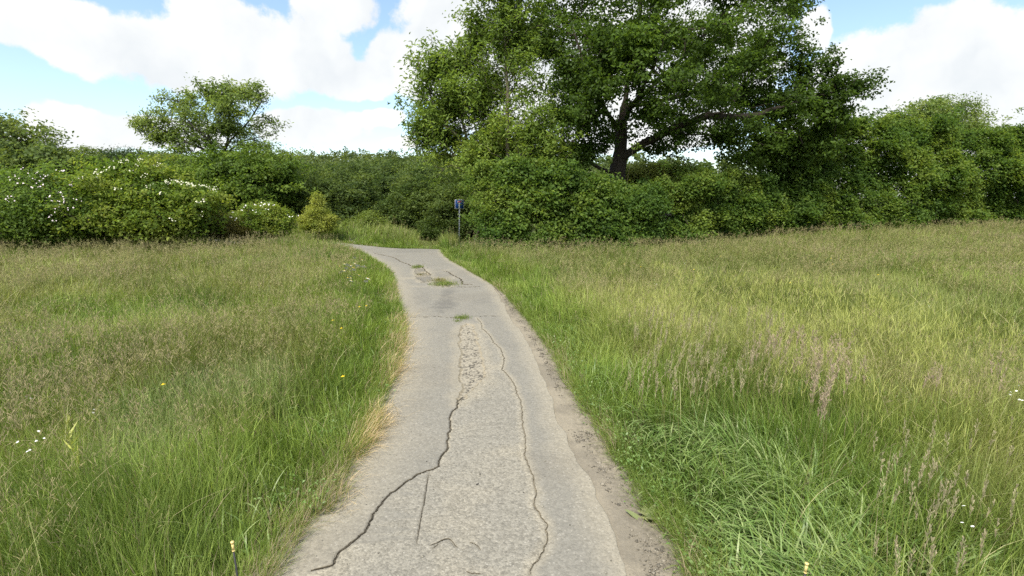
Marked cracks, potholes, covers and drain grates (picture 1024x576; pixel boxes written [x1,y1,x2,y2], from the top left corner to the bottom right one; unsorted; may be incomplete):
crack [375,253,480,287]
crack [311,397,480,571]
pothole [415,268,434,282]
crack [477,318,548,570]
